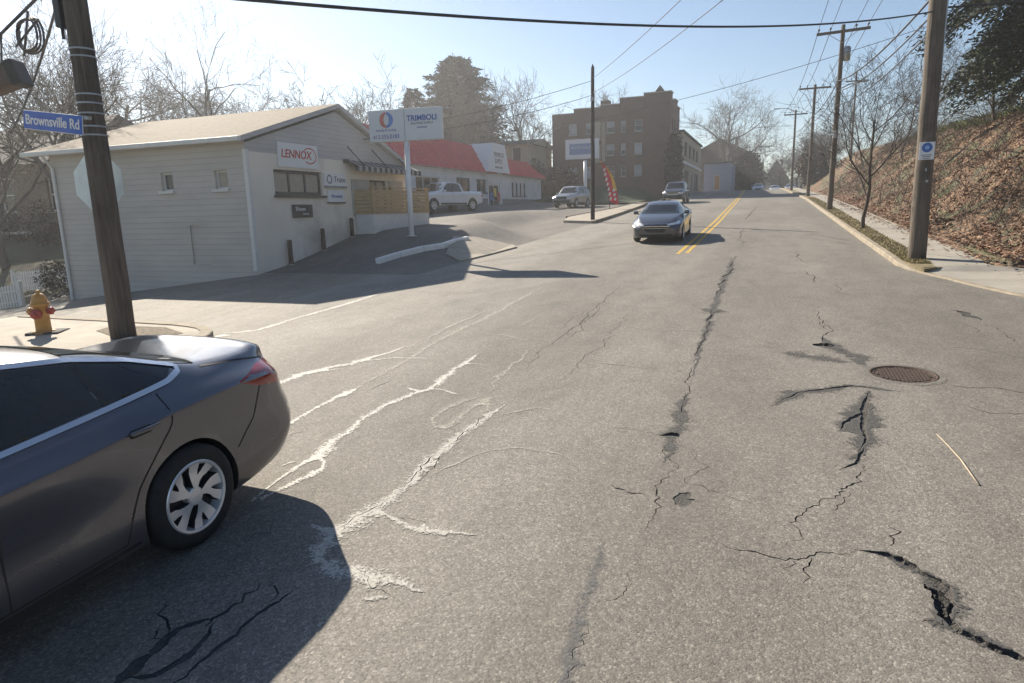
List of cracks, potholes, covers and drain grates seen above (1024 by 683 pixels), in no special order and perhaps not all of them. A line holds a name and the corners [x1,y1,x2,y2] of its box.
crack [557,208,756,681]
crack [815,310,869,366]
crack [711,384,1024,662]
crack [525,294,657,392]
manhole cover [861,363,947,385]
pothole [673,492,695,507]
